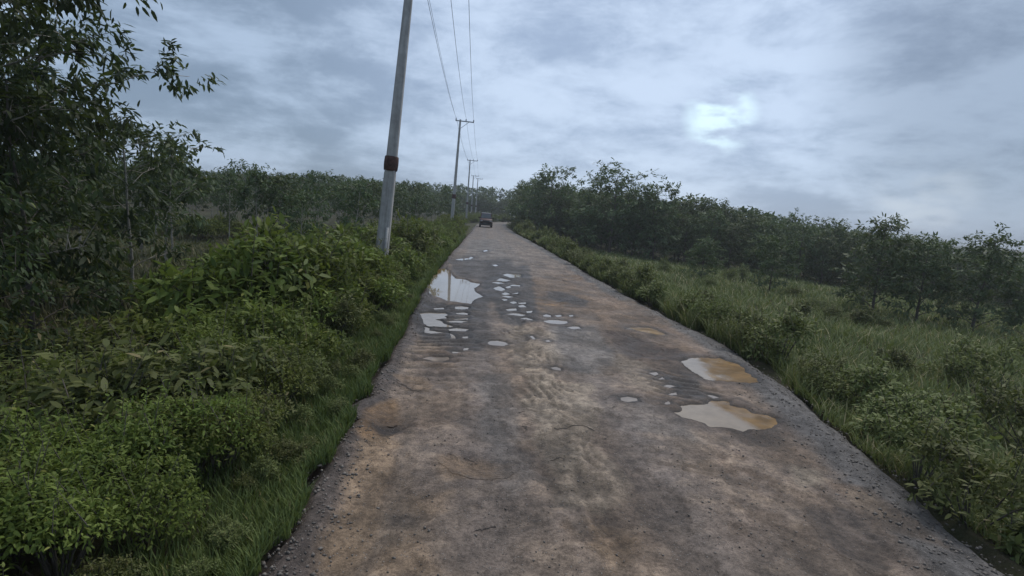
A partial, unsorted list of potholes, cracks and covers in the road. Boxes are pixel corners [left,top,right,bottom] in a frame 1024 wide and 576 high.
pothole [669,397,785,433]
pothole [615,394,643,403]
pothole [482,338,513,346]
pothole [677,355,763,383]
pothole [420,325,451,334]
pothole [371,423,409,437]
pothole [623,325,669,335]
pothole [352,395,413,427]
pothole [417,311,458,327]
pothole [437,450,520,480]
pothole [426,267,485,304]
